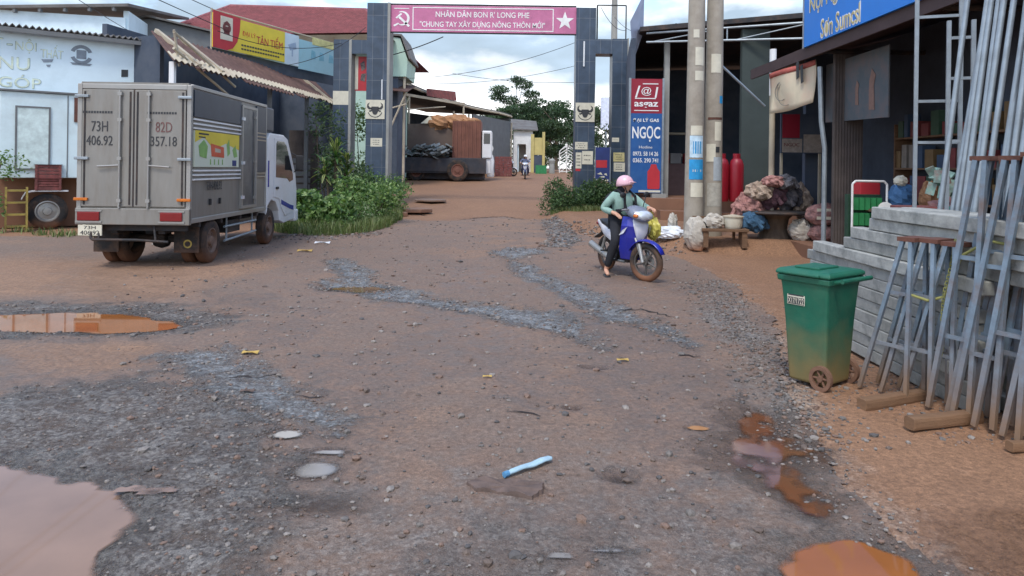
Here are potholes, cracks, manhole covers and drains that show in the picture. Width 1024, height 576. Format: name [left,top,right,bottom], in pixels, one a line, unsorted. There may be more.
pothole [0,464,145,576]
pothole [273,430,301,439]
pothole [0,311,184,334]
pothole [763,540,919,576]
pothole [298,461,337,477]
pothole [724,407,849,516]
